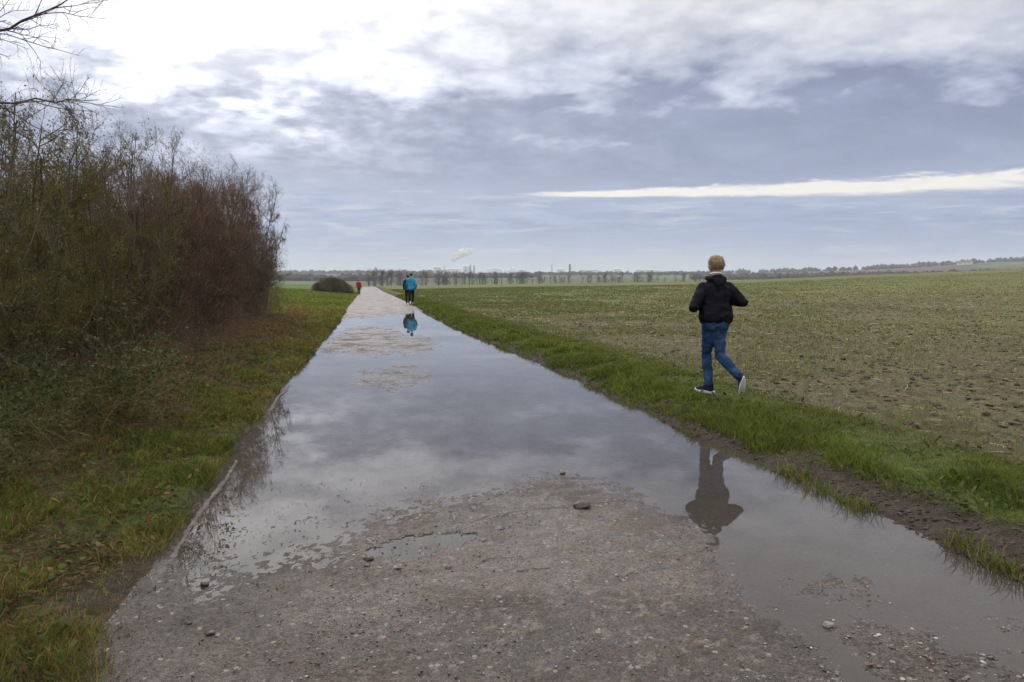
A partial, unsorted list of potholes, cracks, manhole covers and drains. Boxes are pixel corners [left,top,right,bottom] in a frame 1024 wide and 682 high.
pothole [366,530,486,562]
